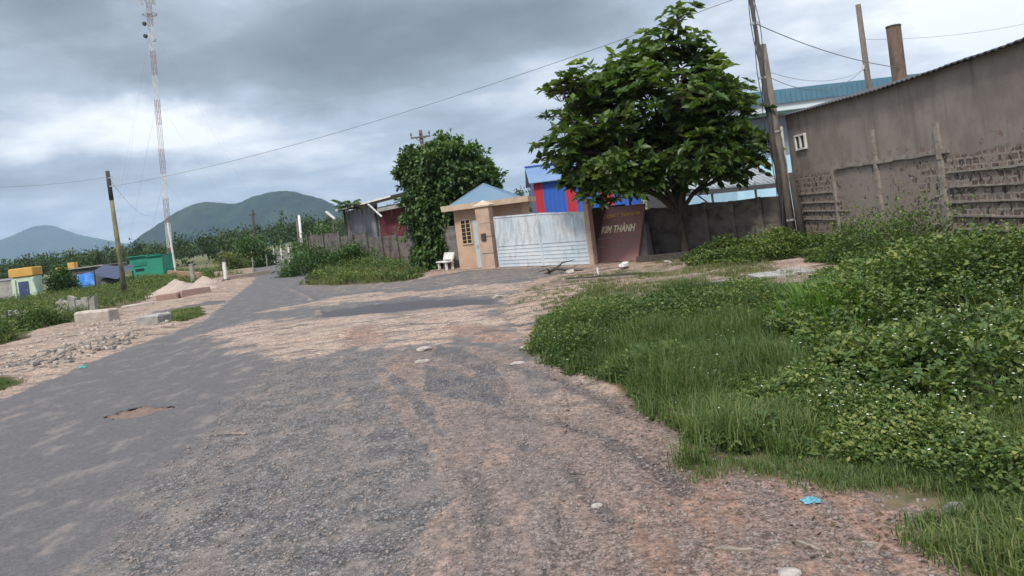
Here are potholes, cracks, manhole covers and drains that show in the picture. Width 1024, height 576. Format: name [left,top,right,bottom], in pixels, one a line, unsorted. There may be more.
pothole [92,404,190,421]
